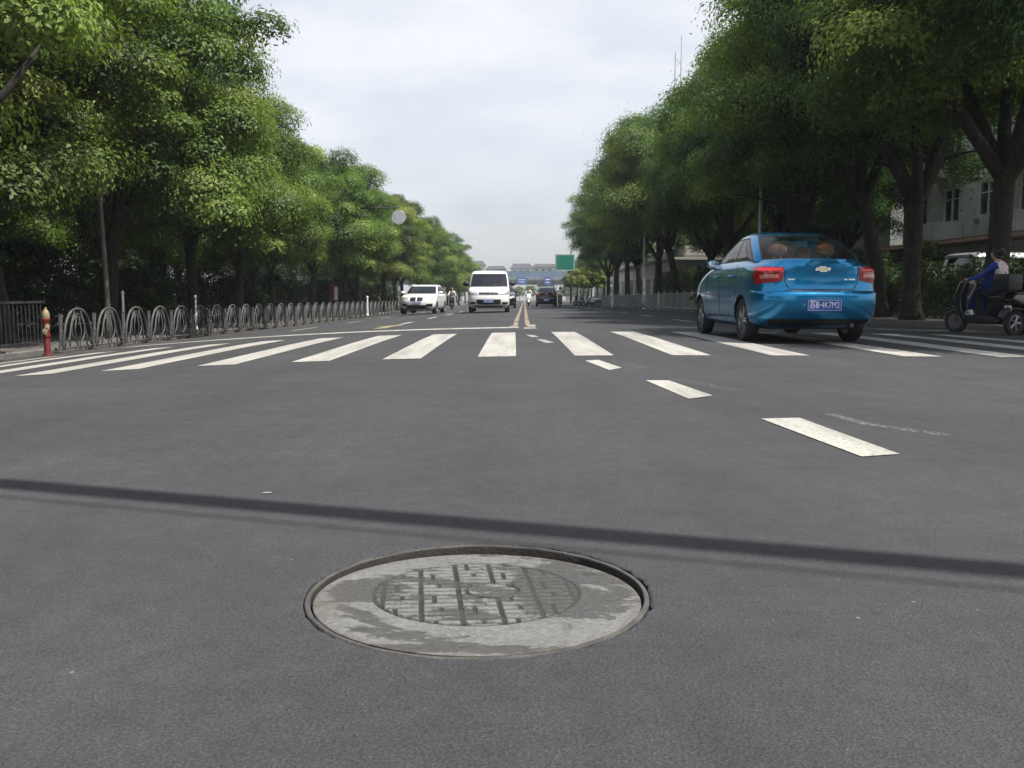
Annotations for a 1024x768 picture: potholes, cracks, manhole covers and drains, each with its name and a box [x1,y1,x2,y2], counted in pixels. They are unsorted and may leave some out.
manhole cover [304,545,649,660]
